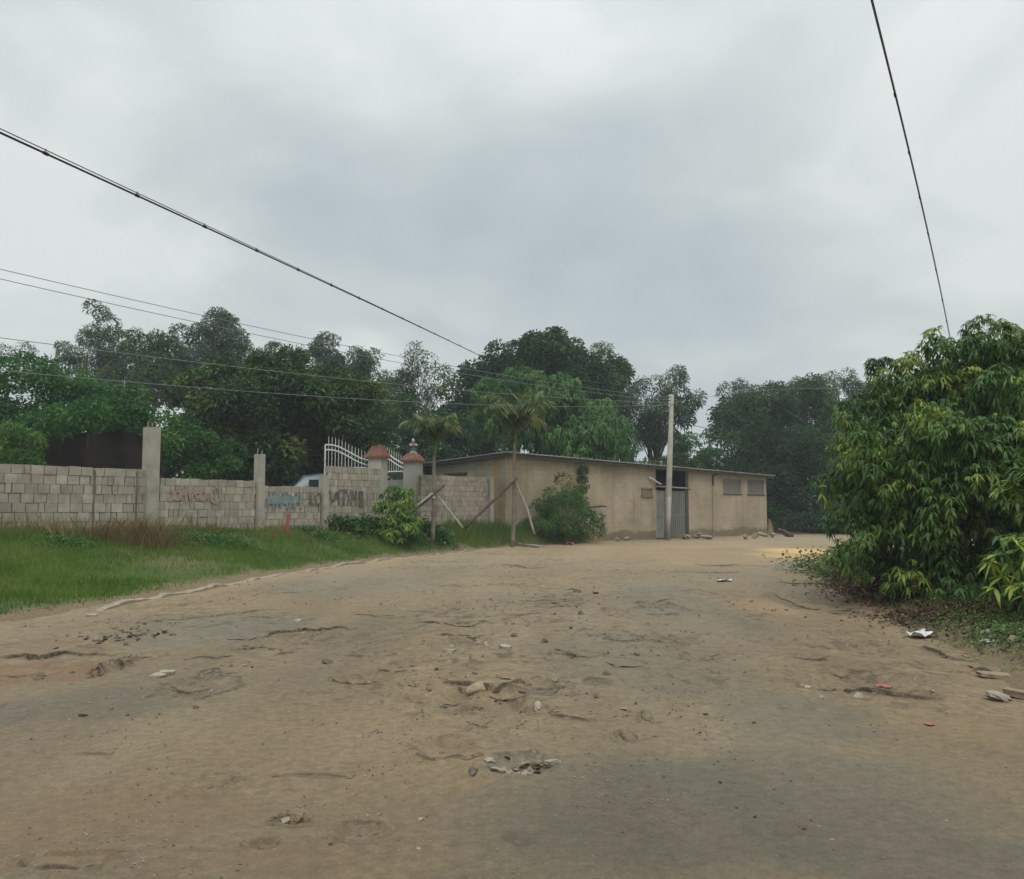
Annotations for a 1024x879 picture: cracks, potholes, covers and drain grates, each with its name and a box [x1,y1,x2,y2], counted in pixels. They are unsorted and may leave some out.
pothole [131,667,256,706]
pothole [263,813,320,828]
pothole [81,654,150,679]
pothole [467,747,575,779]
crack [0,650,152,679]
crack [784,655,948,701]
crack [185,612,594,731]
